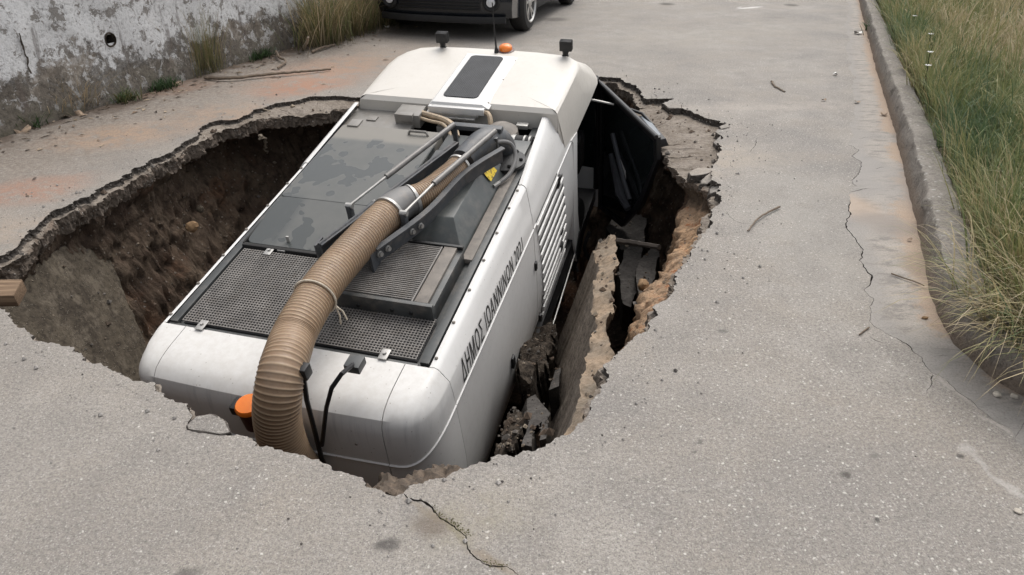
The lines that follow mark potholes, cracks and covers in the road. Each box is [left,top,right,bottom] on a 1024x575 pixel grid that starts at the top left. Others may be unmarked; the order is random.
crack [404,494,518,575]
crack [845,137,1005,426]
